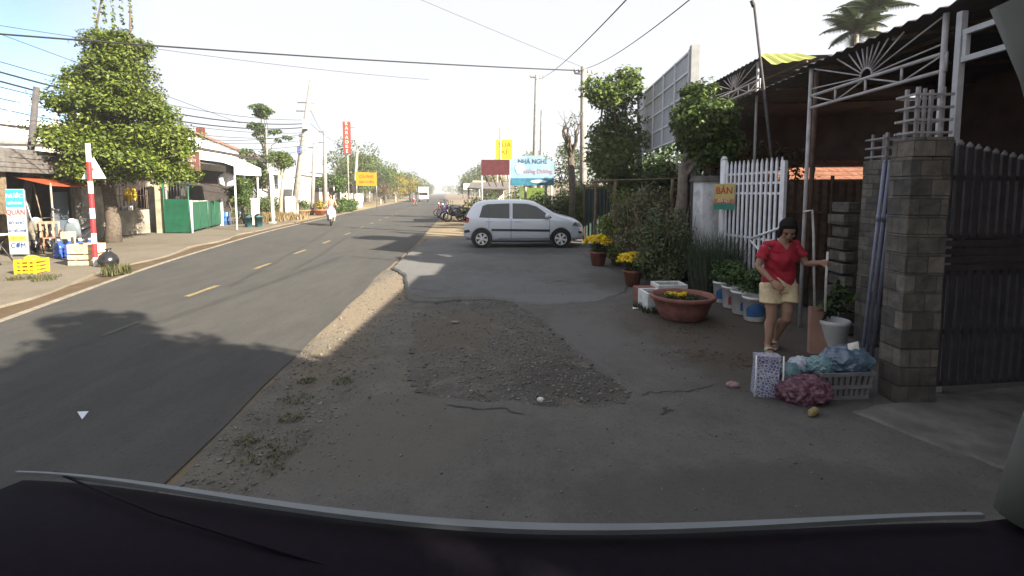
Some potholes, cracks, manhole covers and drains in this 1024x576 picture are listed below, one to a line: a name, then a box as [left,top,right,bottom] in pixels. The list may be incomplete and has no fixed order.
crack [450,404,525,415]
pothole [329,299,632,423]
crack [642,384,714,415]
